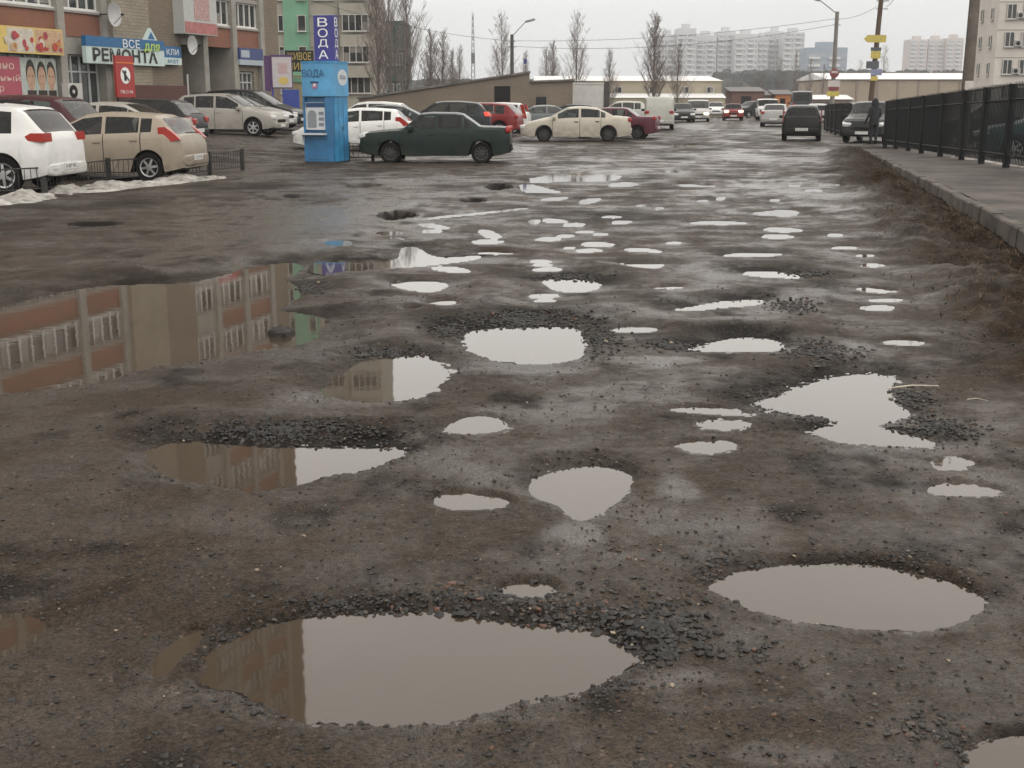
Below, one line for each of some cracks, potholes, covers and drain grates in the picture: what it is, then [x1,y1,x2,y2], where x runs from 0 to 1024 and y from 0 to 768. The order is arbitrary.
pothole [164,589,666,735]
pothole [919,476,1010,498]
pothole [924,455,983,472]
pothole [434,411,518,437]
pothole [114,412,459,494]
pothole [688,548,1006,637]
pothole [365,273,469,294]
pothole [637,320,812,354]
pothole [403,303,642,371]
pothole [425,486,518,512]
pothole [0,245,405,404]
